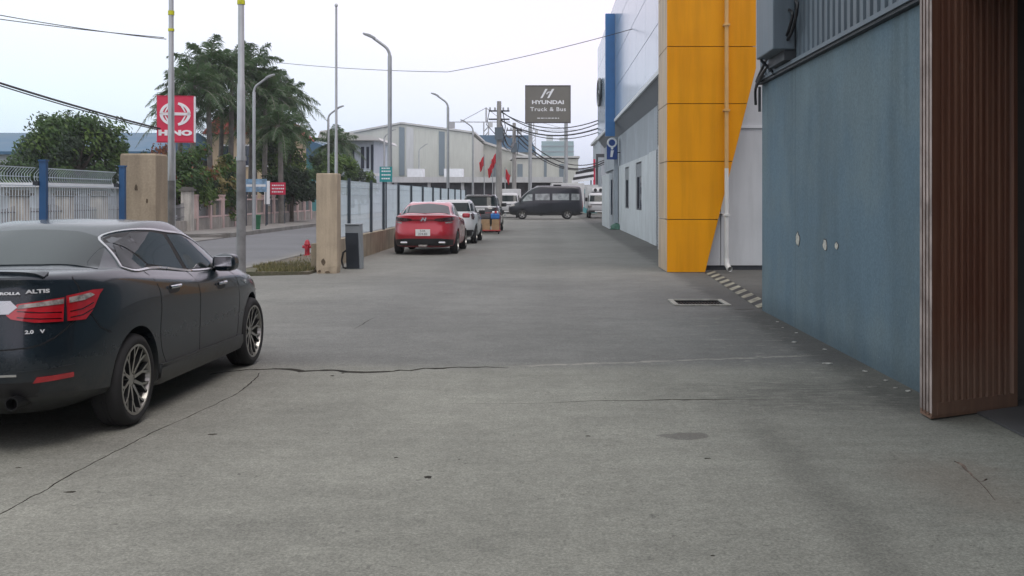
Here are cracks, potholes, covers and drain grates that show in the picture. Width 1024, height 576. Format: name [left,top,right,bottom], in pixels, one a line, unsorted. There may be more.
crack [955,461,995,500]
crack [0,367,504,514]
